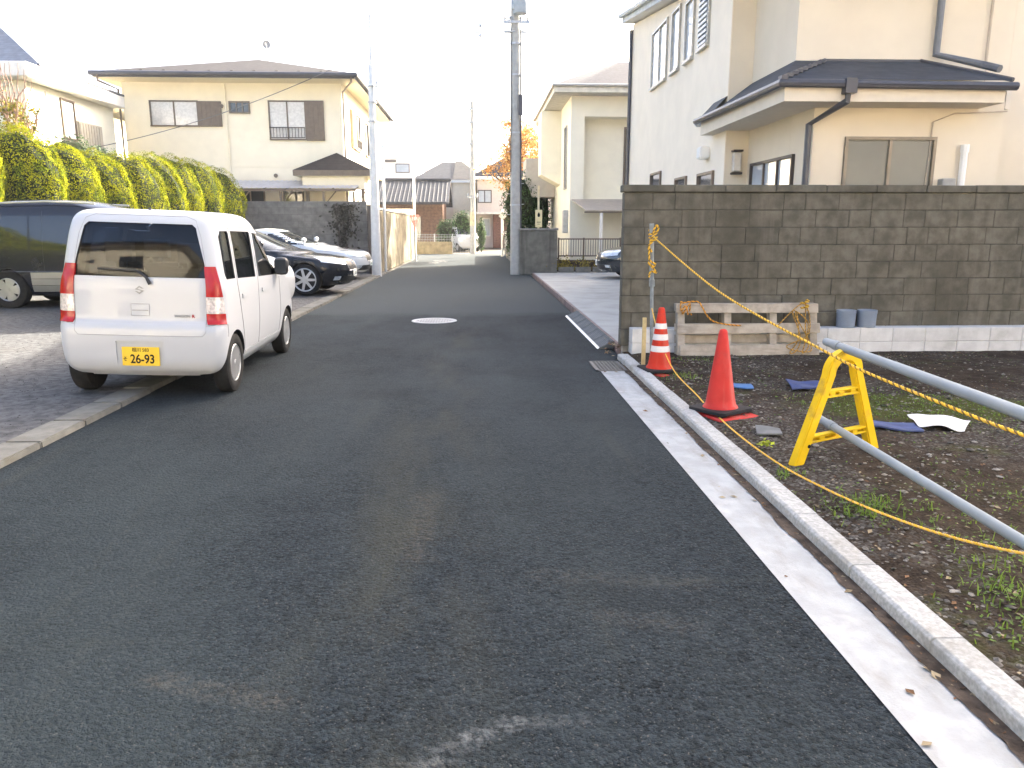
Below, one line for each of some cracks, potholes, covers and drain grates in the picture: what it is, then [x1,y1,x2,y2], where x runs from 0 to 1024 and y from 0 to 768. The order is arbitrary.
drain grate [588,361,627,371]
